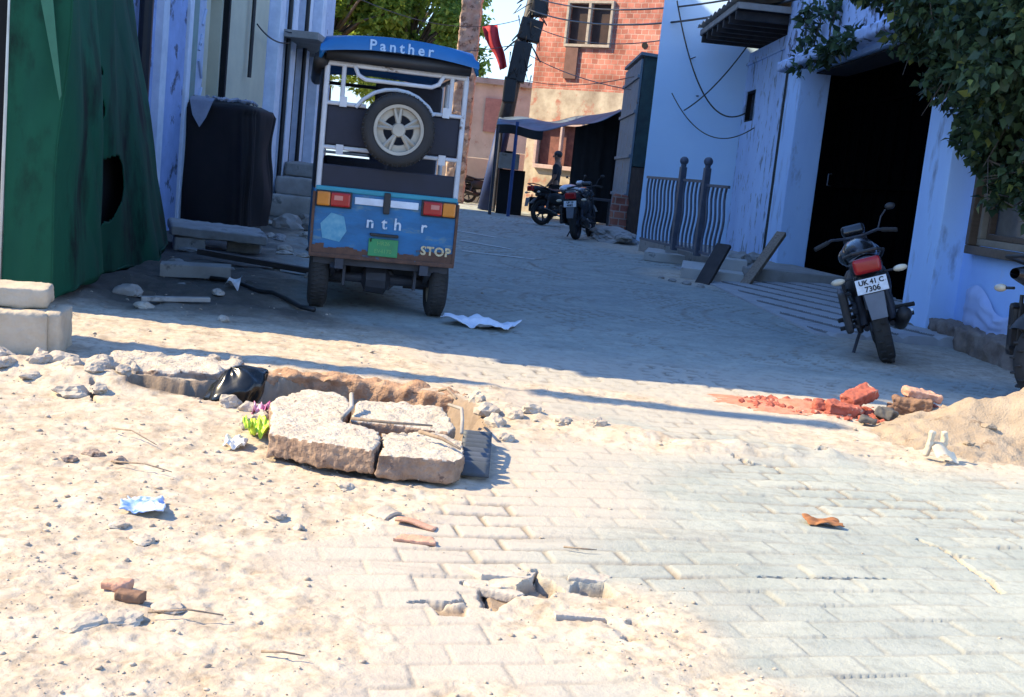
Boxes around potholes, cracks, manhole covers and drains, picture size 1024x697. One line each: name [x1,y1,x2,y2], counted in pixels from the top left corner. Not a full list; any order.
pothole [554,611,612,625]
pothole [425,603,472,618]
pothole [123,374,490,441]
pothole [473,586,523,612]
pothole [566,581,621,600]
pothole [515,574,566,599]
